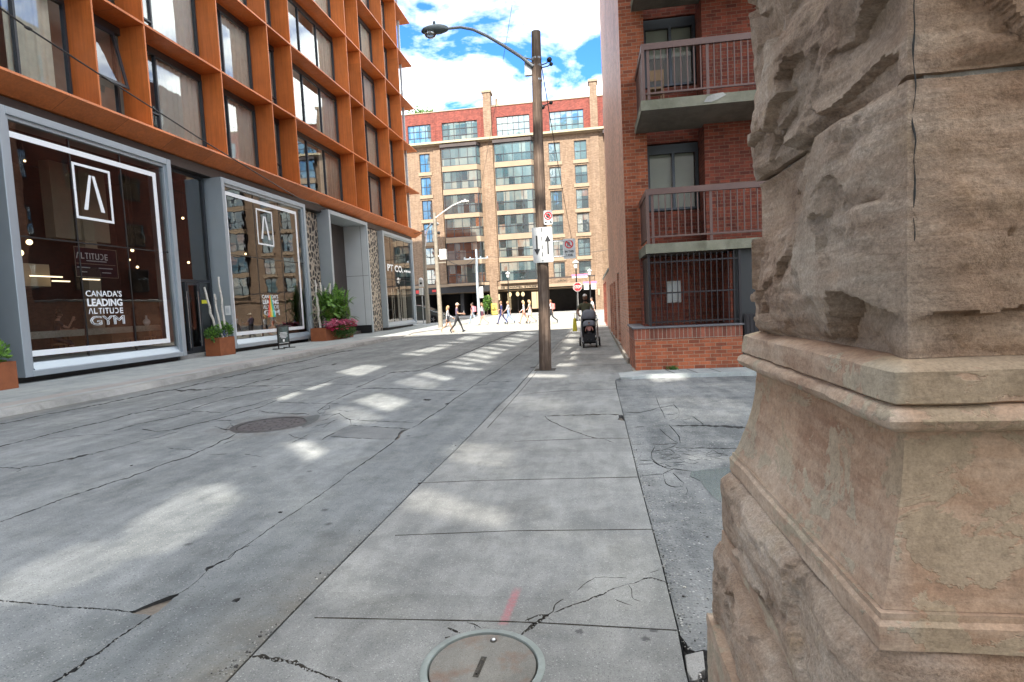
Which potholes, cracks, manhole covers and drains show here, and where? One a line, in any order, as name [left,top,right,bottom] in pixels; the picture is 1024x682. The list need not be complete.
crack [0,331,537,682]
manhole cover [419,629,545,682]
crack [527,398,745,494]
manhole cover [229,416,307,433]
crack [521,570,668,635]
pothole [129,593,179,616]
